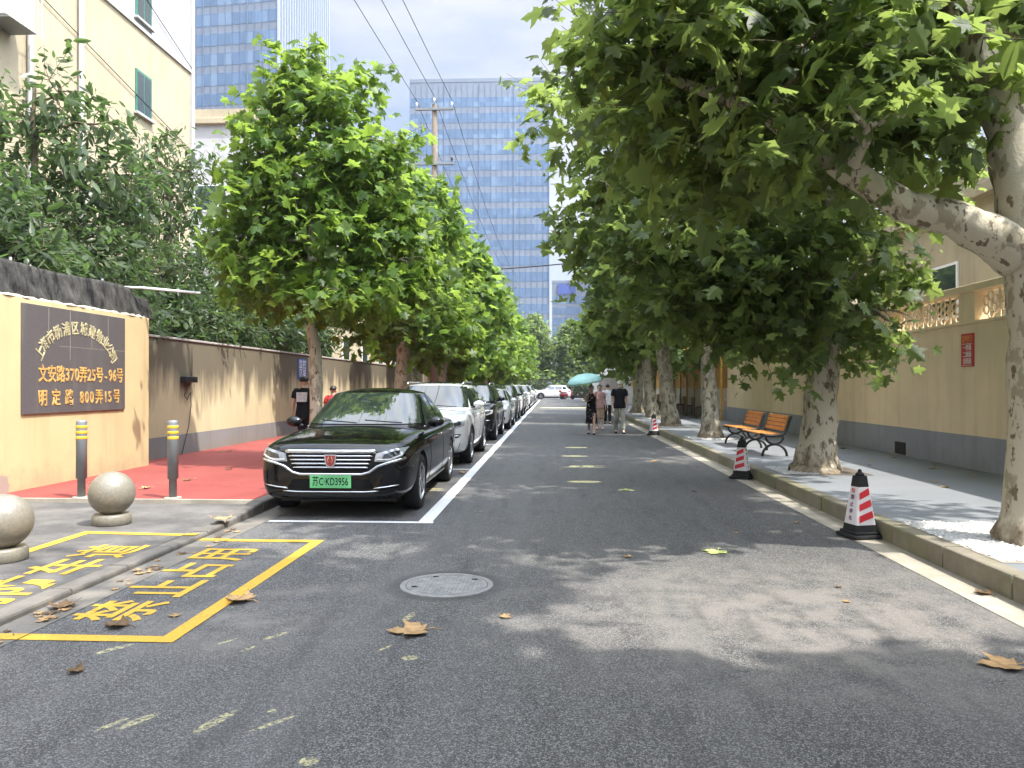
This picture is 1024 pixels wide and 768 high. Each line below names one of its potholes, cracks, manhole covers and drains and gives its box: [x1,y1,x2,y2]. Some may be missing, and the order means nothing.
manhole cover [400,573,493,598]
